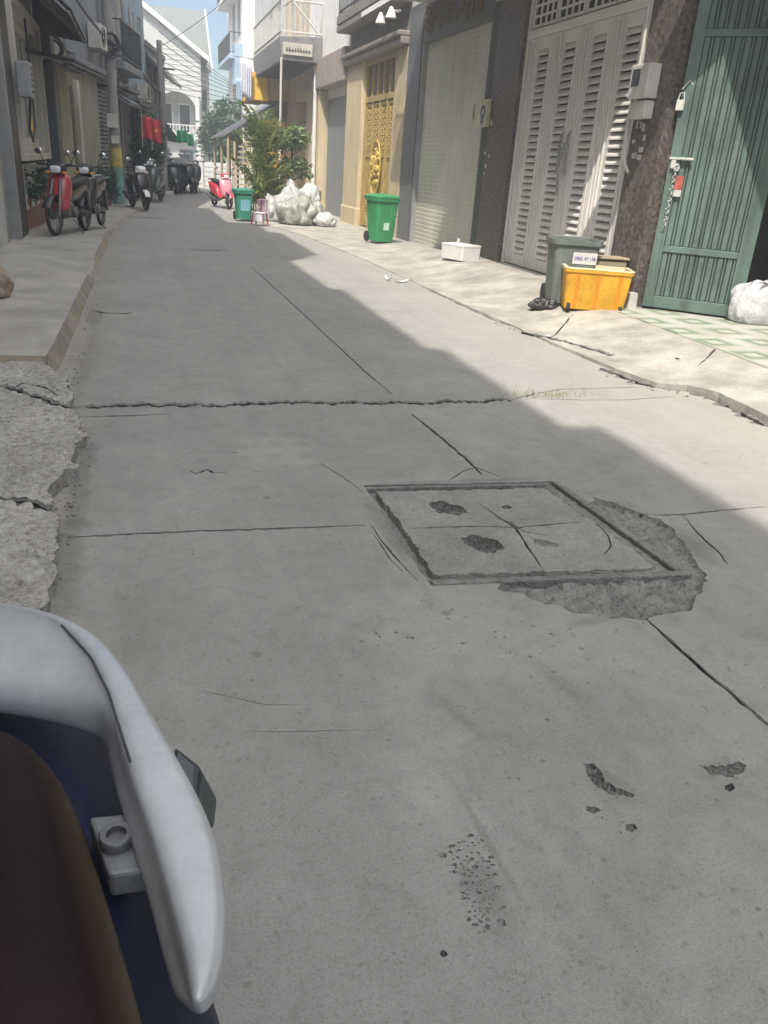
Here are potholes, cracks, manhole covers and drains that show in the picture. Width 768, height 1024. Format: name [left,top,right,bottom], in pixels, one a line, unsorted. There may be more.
pothole [697,758,753,781]
crack [0,267,768,480]
pothole [437,833,507,934]
pothole [579,757,642,803]
pothole [497,496,713,624]
crack [640,507,761,564]
manhole cover [363,481,692,589]
crack [646,619,768,726]
